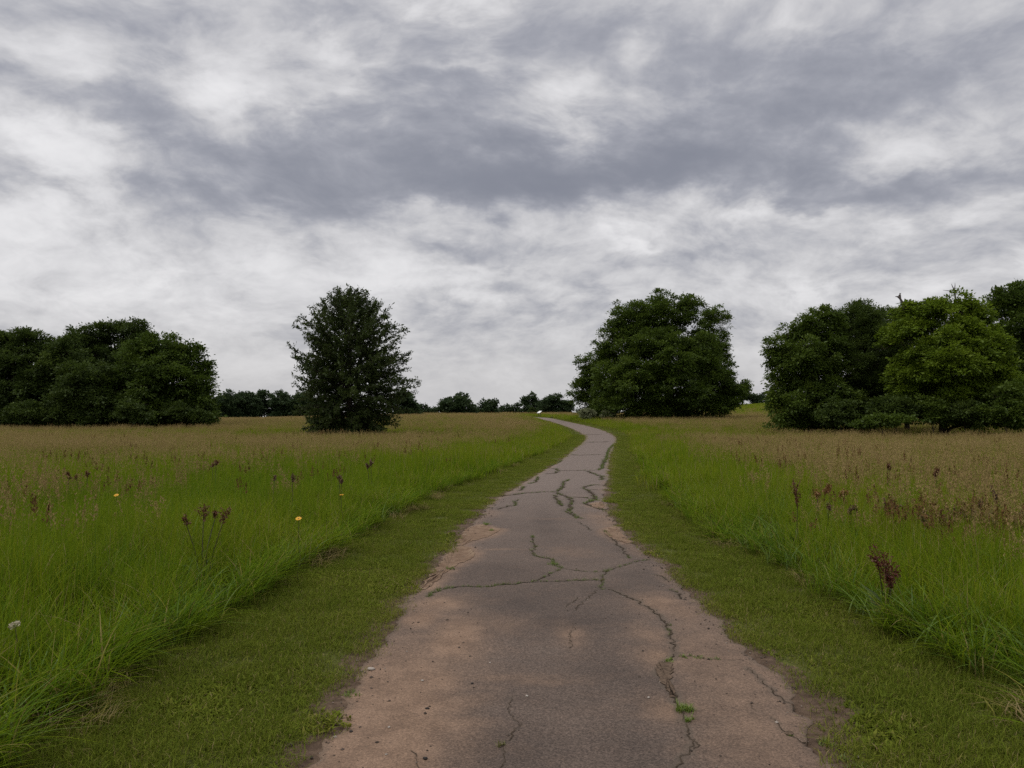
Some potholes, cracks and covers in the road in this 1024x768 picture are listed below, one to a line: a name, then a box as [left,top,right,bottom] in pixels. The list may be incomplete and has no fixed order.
crack [747,667,808,744]
crack [433,446,700,768]
